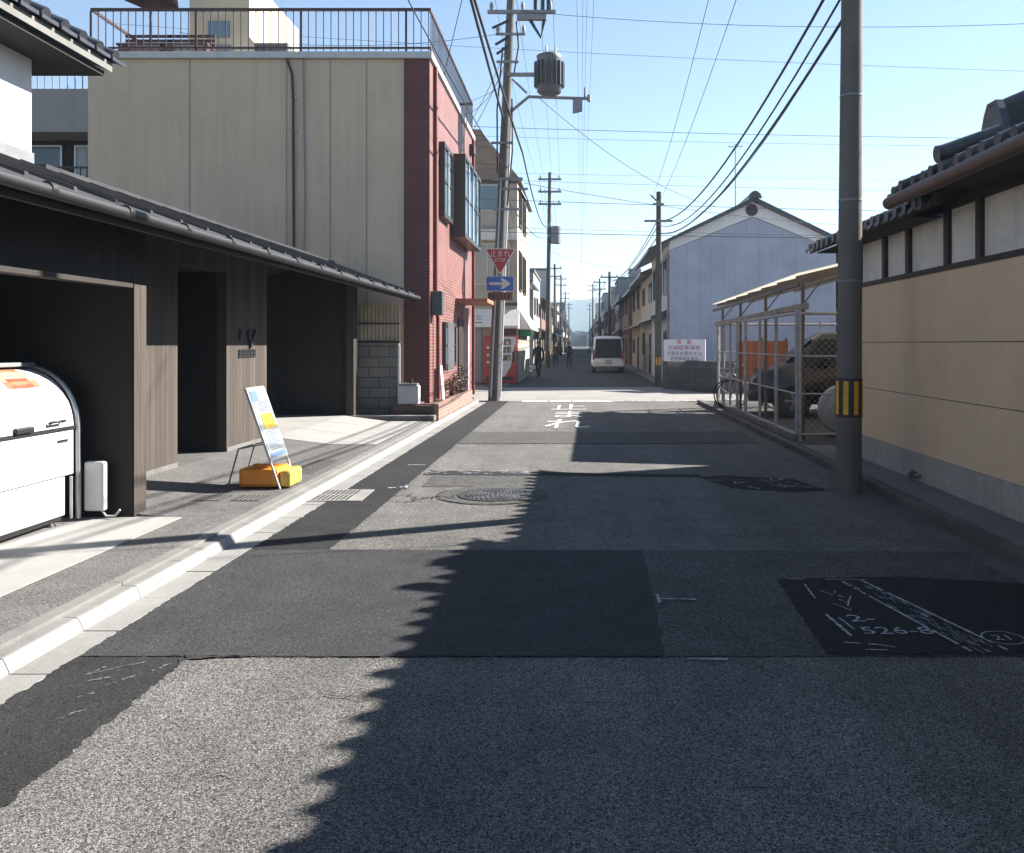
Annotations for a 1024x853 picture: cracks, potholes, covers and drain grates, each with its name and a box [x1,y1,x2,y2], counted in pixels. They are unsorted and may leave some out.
drain grate [306,489,375,502]
manhole cover [458,488,532,501]
